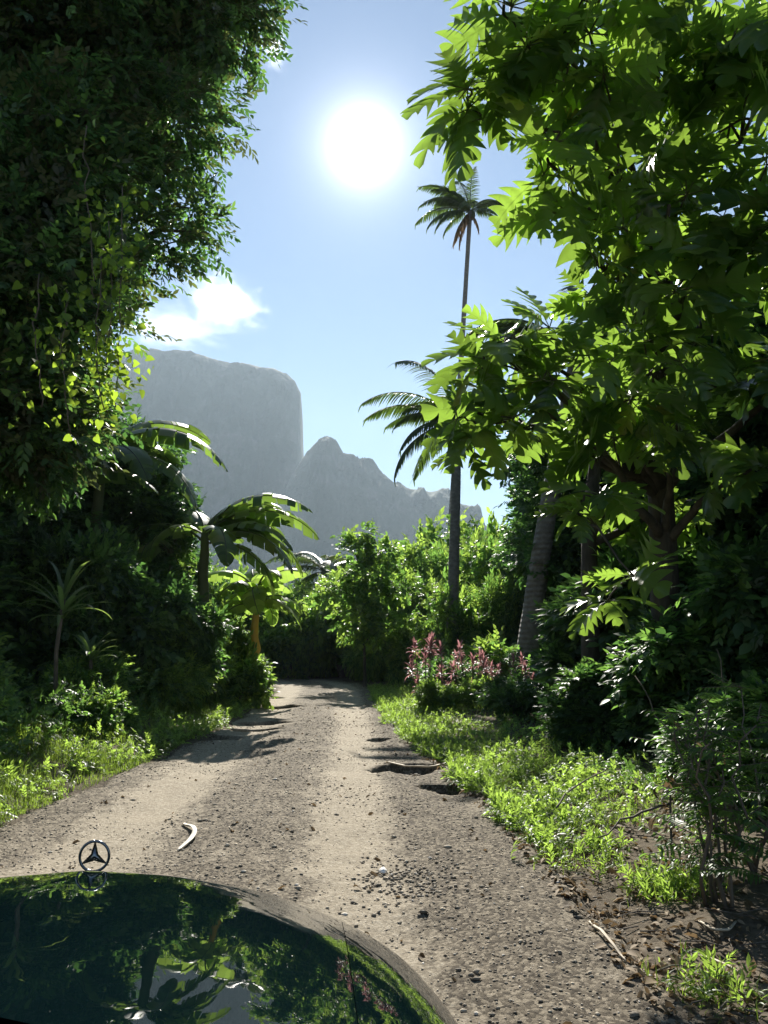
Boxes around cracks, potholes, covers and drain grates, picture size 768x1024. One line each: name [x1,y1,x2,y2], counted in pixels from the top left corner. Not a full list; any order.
pothole [405,782,484,797]
pothole [354,762,448,778]
